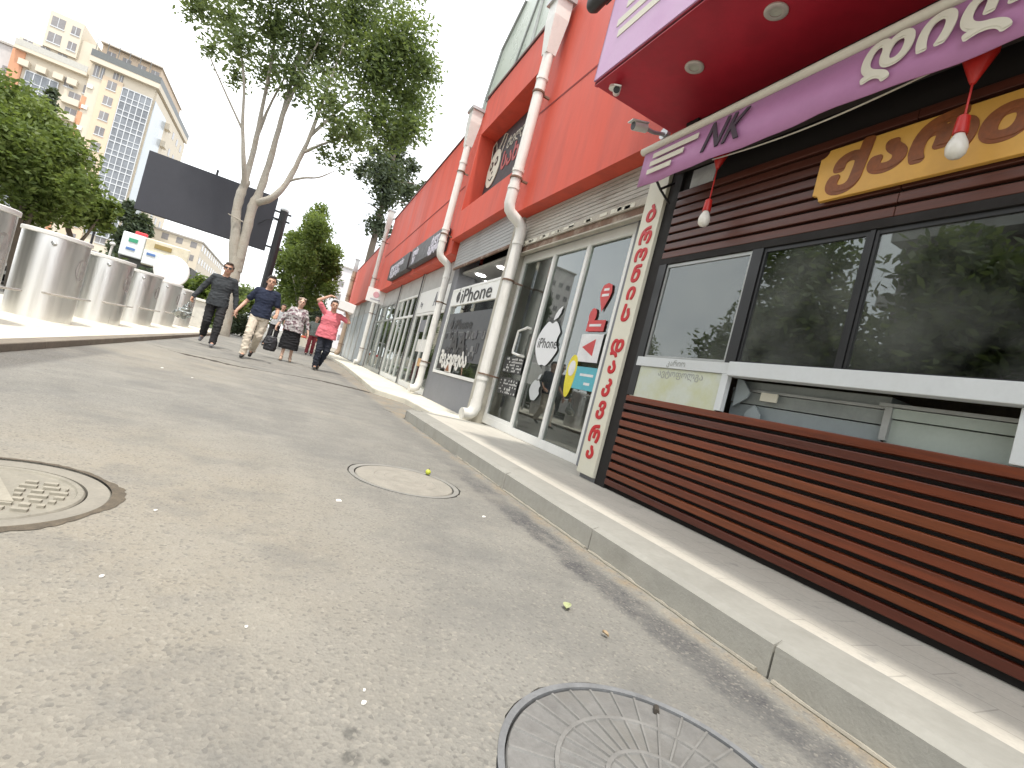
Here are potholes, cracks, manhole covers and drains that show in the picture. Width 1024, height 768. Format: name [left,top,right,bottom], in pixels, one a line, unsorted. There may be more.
manhole cover [348,463,459,499]
manhole cover [496,683,764,768]
manhole cover [0,457,127,532]
